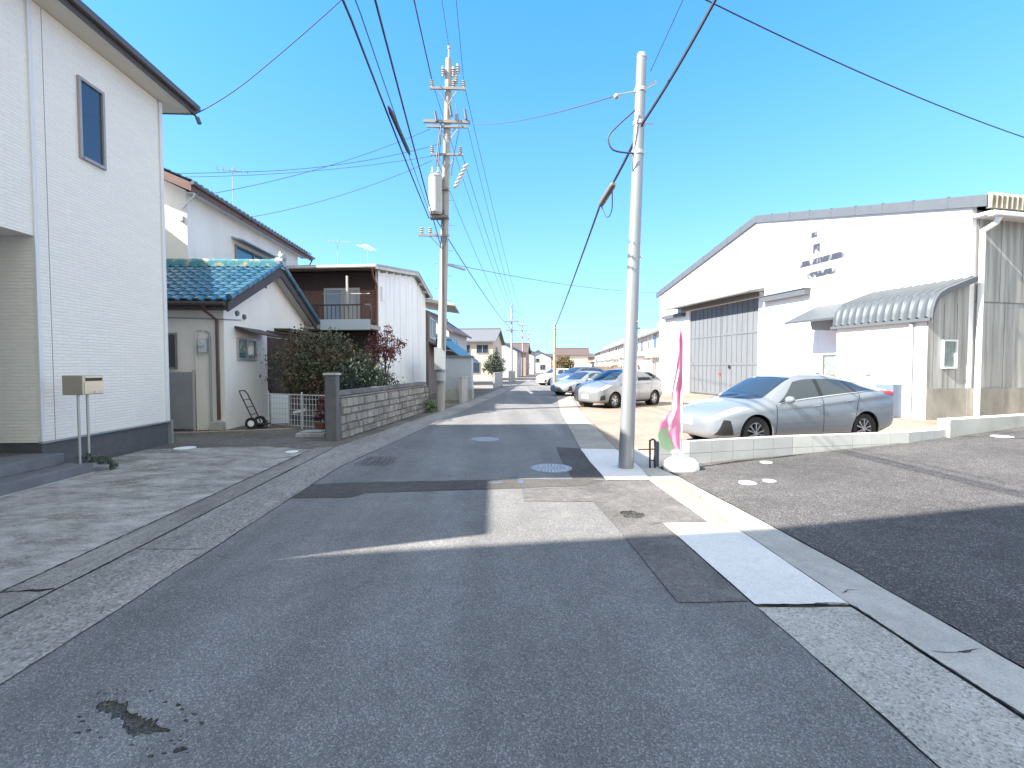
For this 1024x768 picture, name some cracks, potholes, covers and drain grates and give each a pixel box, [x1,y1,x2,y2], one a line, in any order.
pothole [74,689,205,758]
manhole cover [531,464,572,473]
